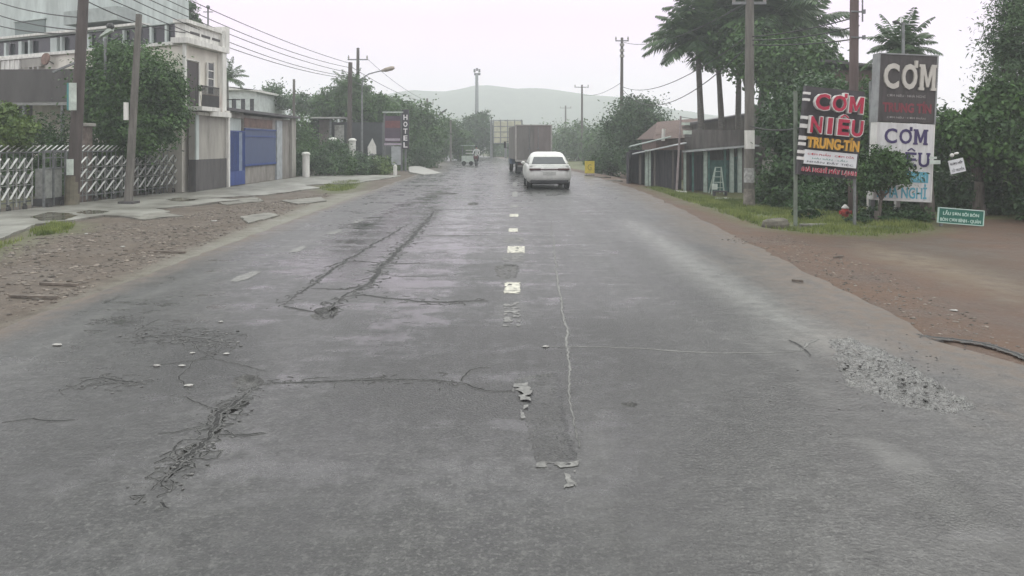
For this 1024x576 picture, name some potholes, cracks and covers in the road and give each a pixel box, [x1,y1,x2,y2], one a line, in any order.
crack [58,315,515,511]
crack [276,208,483,315]
crack [541,221,819,448]
pothole [828,337,978,414]
